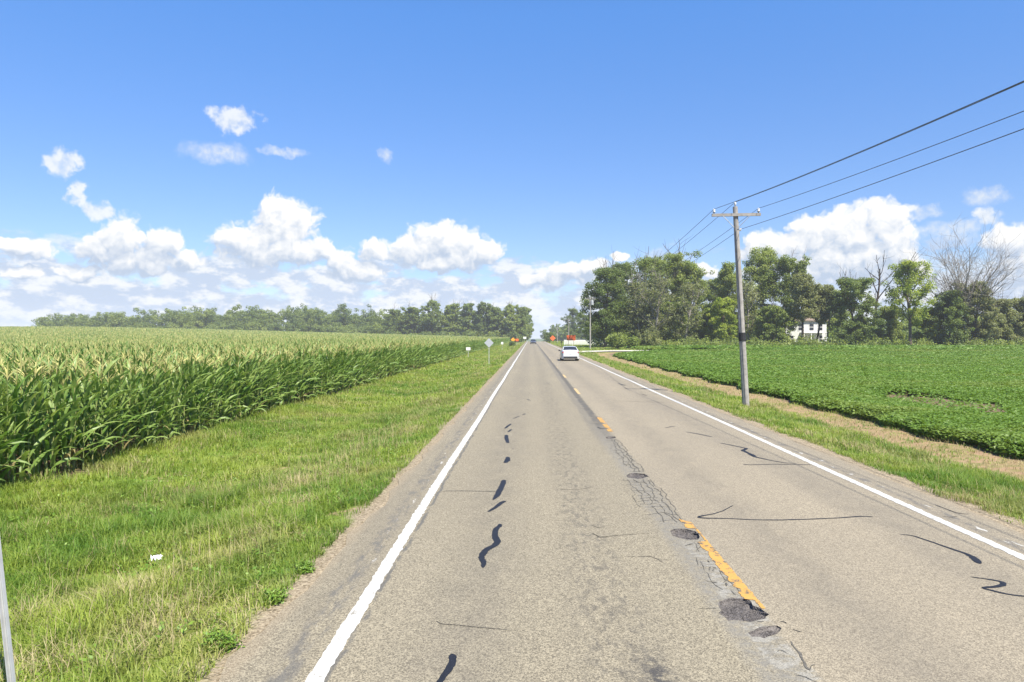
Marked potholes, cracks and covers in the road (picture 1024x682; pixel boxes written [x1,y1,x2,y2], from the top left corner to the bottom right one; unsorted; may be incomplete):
pothole [670,529,700,540]
pothole [748,625,781,638]
crack [685,543,739,595]
pothole [718,598,769,622]
crack [592,427,682,537]
